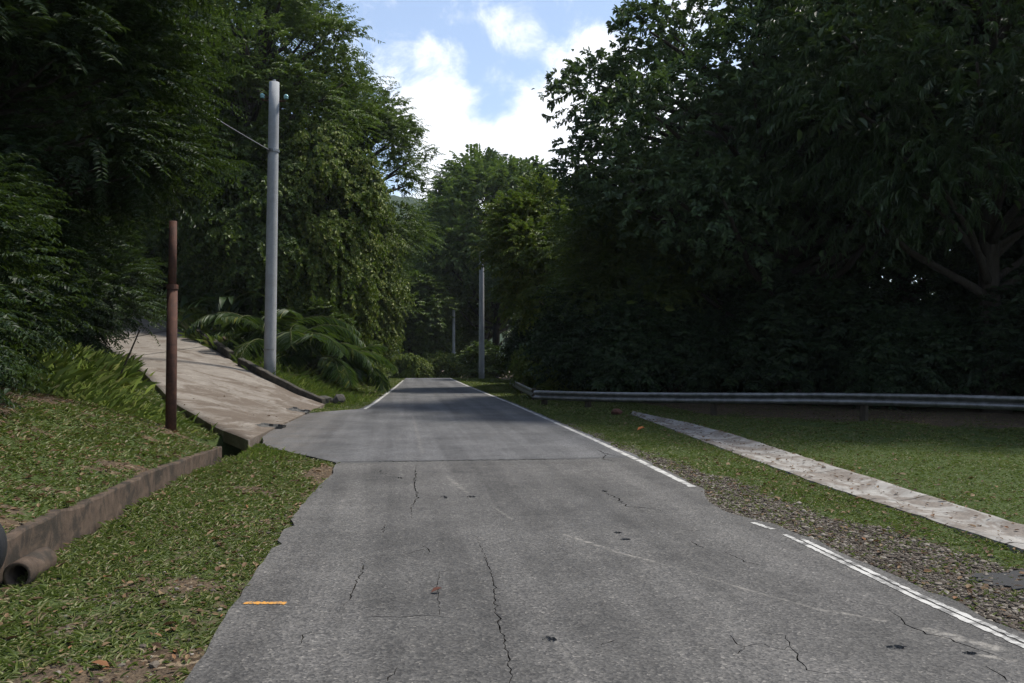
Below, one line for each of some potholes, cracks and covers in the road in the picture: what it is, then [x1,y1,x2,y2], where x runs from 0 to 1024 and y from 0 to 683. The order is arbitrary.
crack [889,610,1007,681]
crack [479,540,513,683]
crack [352,459,548,515]
crack [730,635,835,674]
